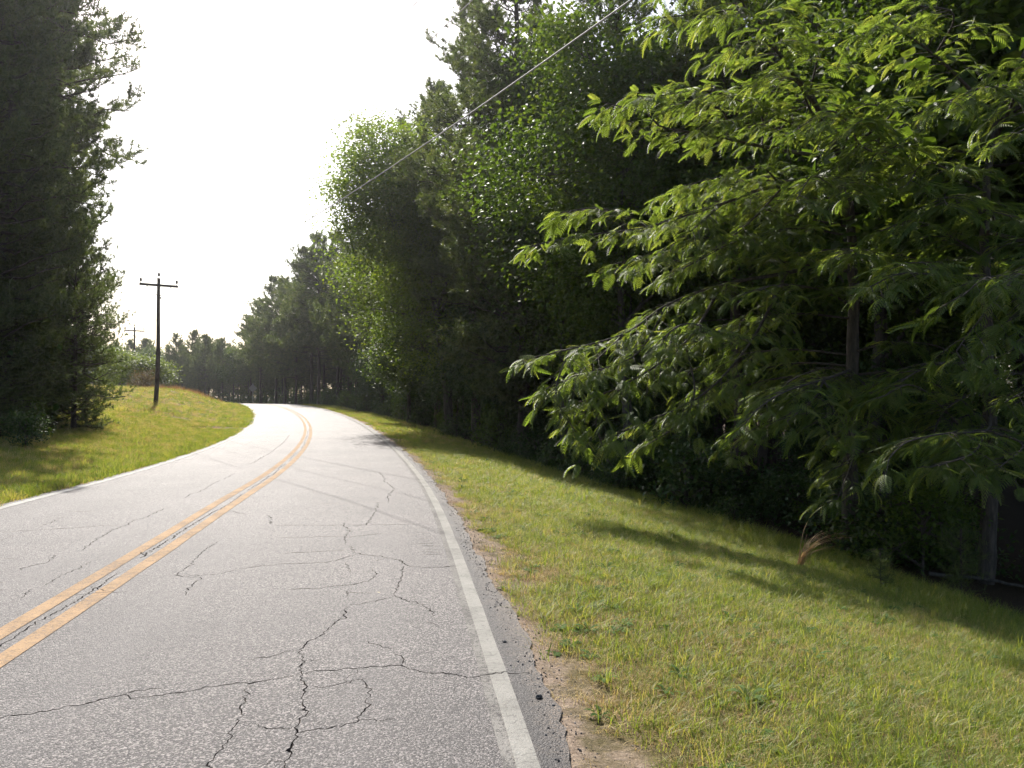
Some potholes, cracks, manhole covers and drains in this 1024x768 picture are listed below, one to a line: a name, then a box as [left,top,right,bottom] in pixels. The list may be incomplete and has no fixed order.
crack [176,473,450,626]
crack [8,509,163,599]
crack [0,607,518,768]
